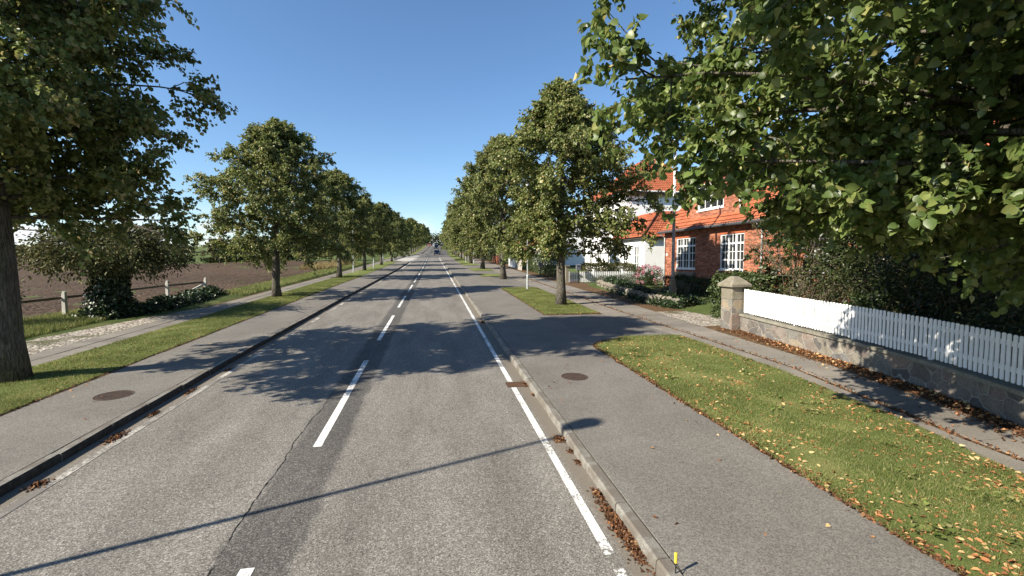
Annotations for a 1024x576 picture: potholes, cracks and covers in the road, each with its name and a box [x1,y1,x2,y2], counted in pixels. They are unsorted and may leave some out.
manhole cover [92,390,135,401]
manhole cover [561,373,588,381]
